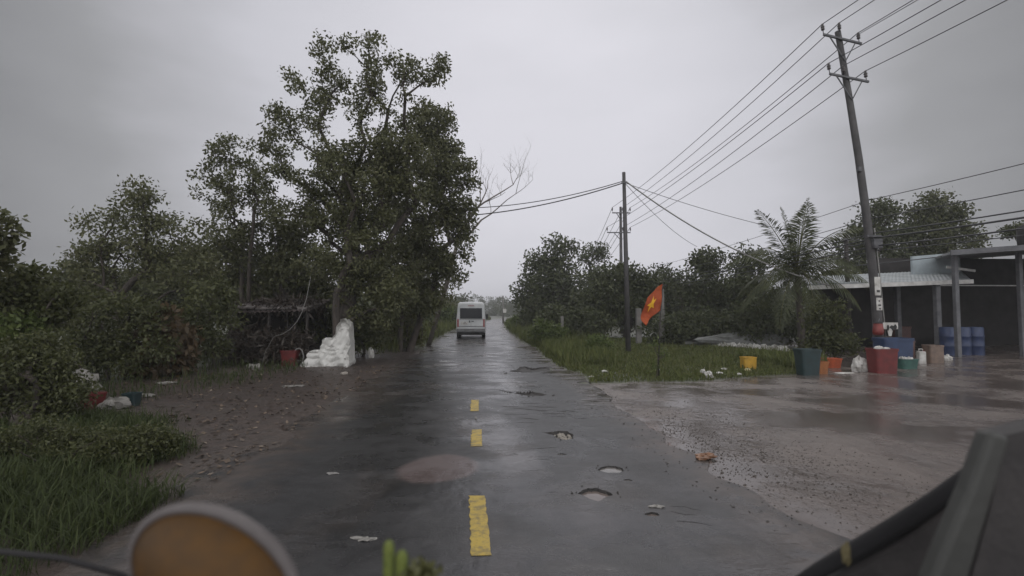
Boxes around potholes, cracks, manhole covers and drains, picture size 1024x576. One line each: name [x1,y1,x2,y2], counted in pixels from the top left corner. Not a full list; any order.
pothole [571,485,621,501]
pothole [503,366,554,374]
pothole [596,465,629,473]
pothole [545,429,583,440]
